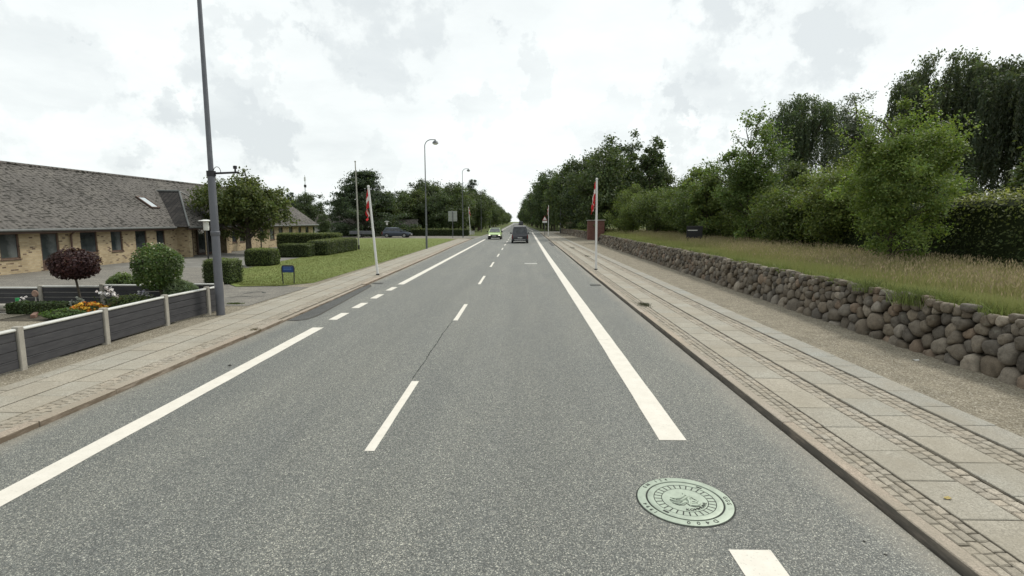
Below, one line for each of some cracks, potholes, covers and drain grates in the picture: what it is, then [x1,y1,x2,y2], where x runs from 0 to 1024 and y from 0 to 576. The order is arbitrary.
manhole cover [636,478,736,528]
crack [412,322,452,379]
